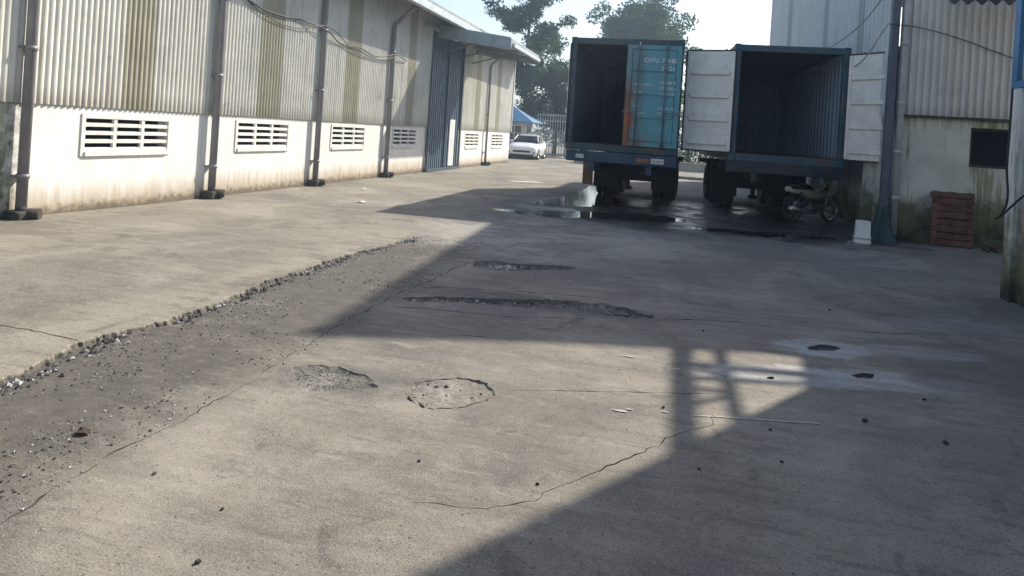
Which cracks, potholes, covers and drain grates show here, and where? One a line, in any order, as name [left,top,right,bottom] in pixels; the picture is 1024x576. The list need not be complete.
pothole [401,296,655,319]
pothole [473,261,576,271]
crack [2,325,77,340]
pothole [404,377,495,410]
pothole [283,365,379,393]
crack [416,417,714,509]
